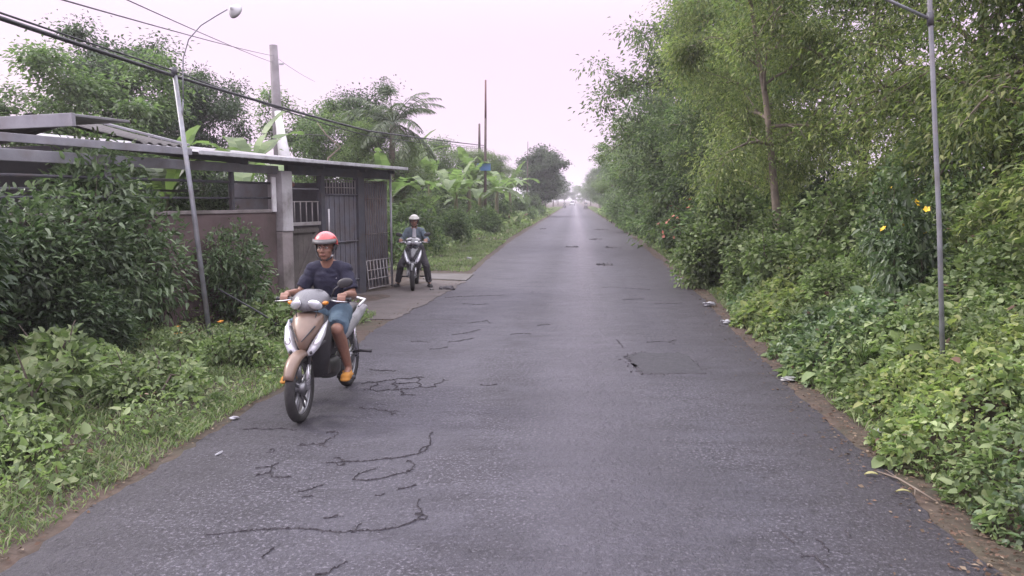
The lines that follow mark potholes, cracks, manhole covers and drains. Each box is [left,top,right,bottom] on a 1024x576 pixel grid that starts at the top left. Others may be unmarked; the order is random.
crack [315,559,348,576]
crack [204,427,437,561]
crack [359,369,449,415]
crack [411,295,498,350]
crack [780,528,851,573]
